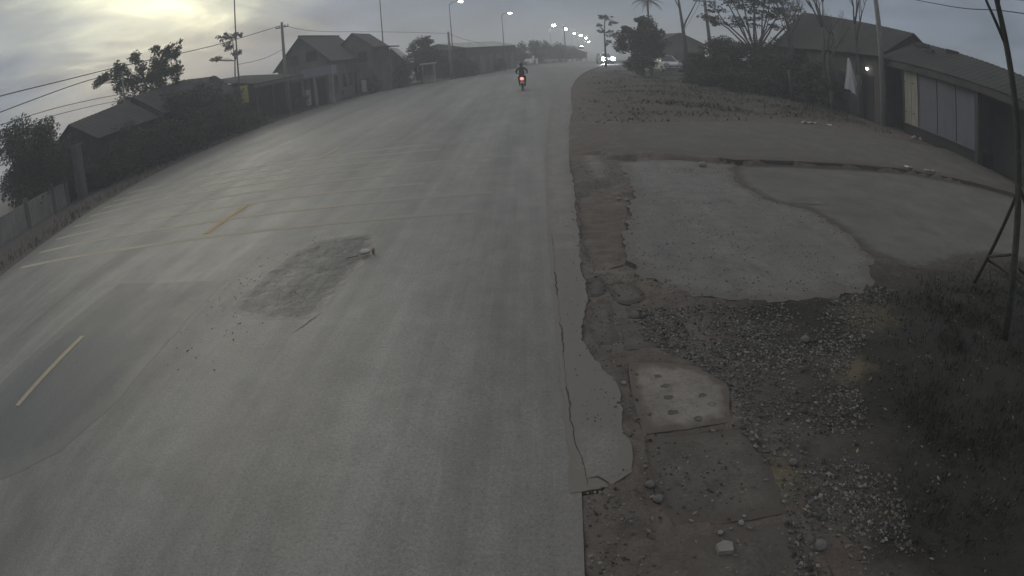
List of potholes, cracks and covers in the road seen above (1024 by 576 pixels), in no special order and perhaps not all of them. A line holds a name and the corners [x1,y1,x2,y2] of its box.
crack [551,234,610,485]
